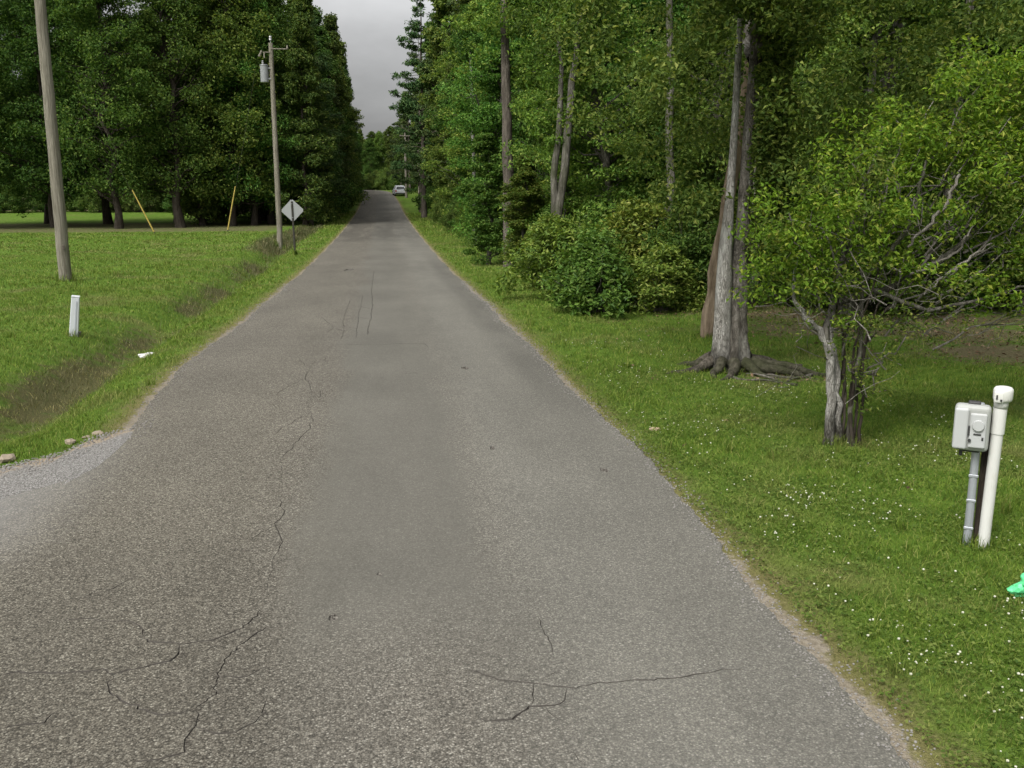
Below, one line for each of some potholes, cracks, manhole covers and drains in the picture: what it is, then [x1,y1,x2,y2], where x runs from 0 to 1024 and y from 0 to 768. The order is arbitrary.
crack [466,669,746,721]
crack [324,276,373,338]
crack [230,358,326,594]
crack [3,611,267,762]
